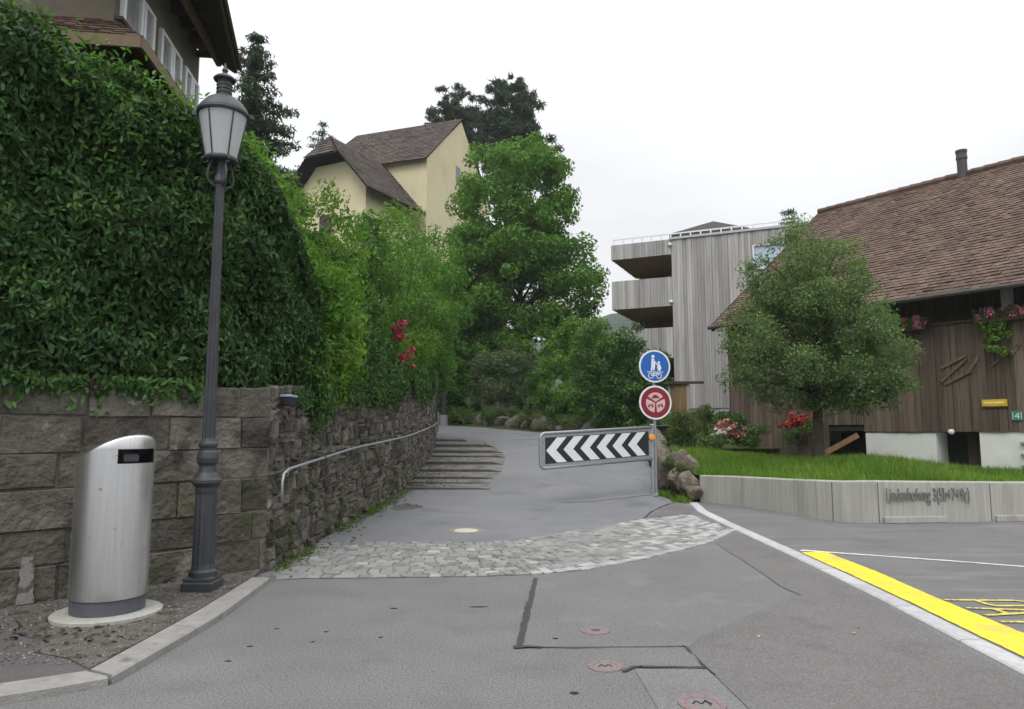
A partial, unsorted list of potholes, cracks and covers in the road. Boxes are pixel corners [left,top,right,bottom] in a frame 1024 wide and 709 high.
crack [716,543,801,595]
manhole cover [581,626,610,635]
manhole cover [588,660,624,673]
manhole cover [677,694,727,709]
